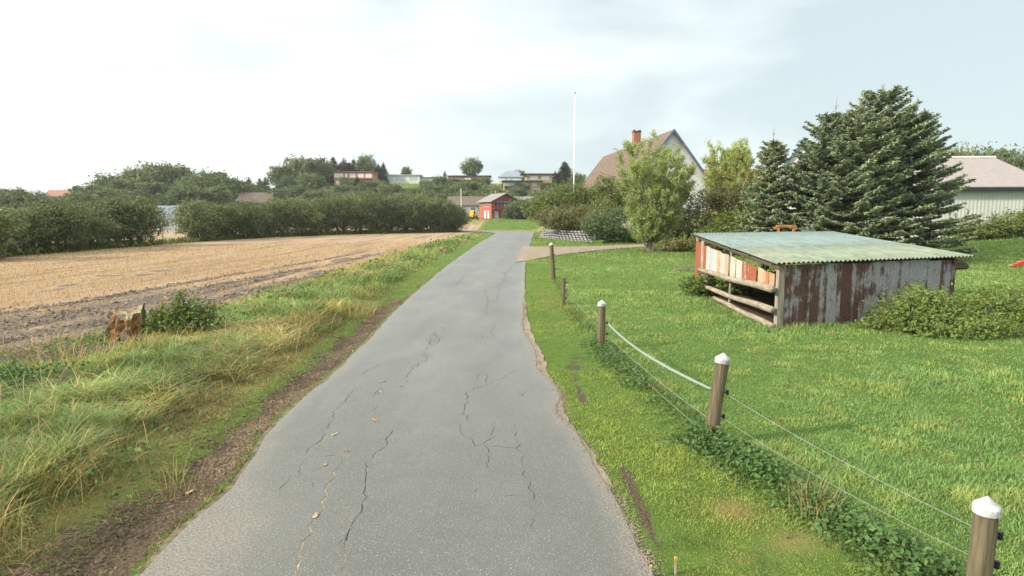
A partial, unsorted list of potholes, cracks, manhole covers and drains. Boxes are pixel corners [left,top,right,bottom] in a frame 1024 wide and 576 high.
crack [280,368,392,575]
crack [460,423,542,541]
